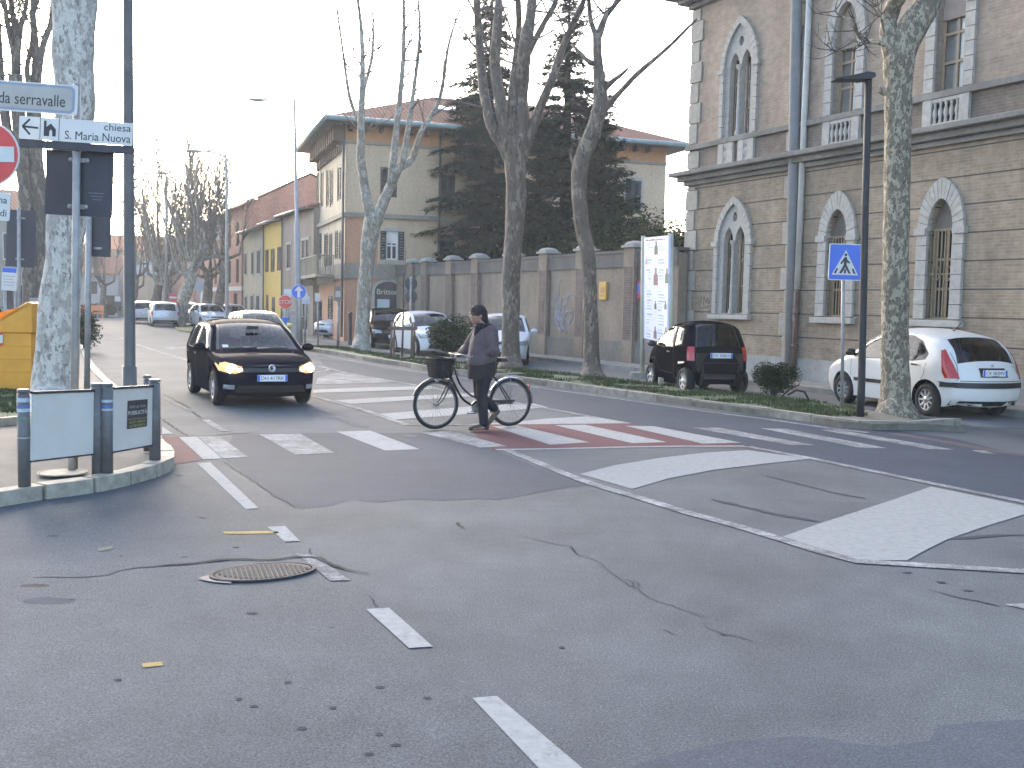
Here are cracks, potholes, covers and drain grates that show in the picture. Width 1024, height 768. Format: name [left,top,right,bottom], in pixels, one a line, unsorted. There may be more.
crack [520,535,775,646]
crack [88,548,367,577]
manhole cover [209,562,316,582]
